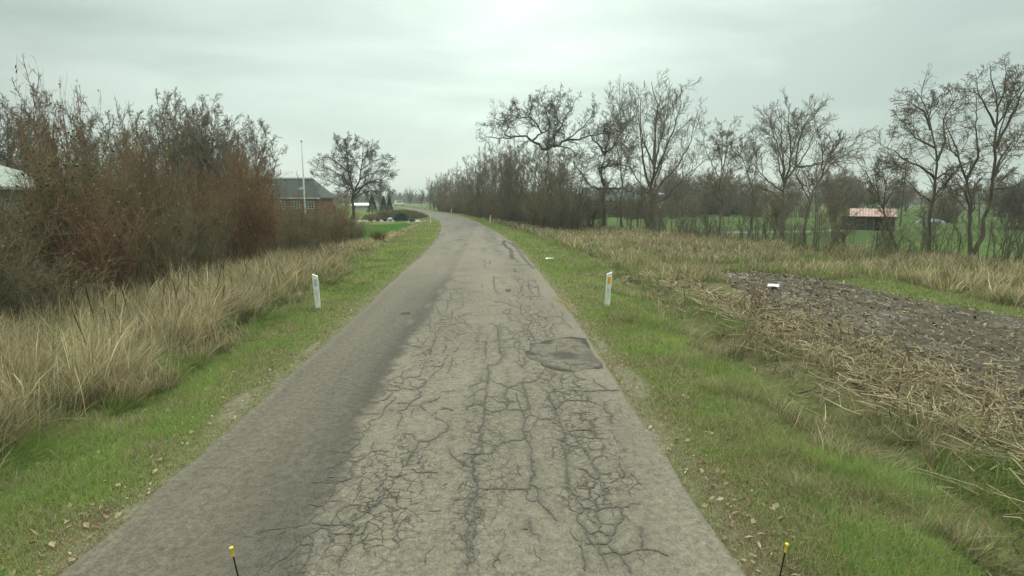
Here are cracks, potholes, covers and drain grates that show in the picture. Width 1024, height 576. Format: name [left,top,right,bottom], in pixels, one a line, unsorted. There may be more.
crack [401,240,572,380]
crack [257,339,669,572]
